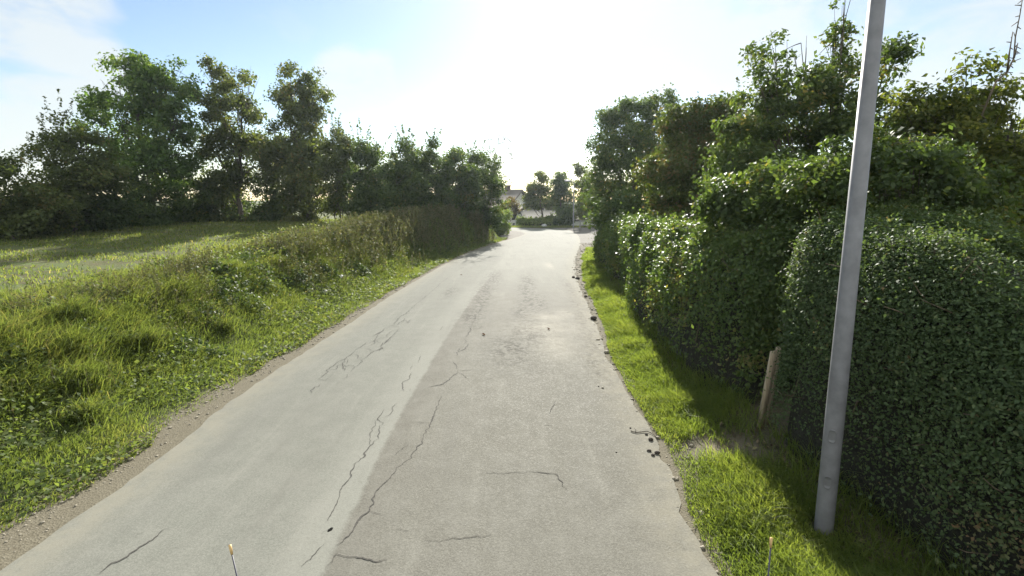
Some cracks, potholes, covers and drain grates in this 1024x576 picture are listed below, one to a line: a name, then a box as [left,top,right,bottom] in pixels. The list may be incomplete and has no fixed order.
crack [307,306,481,567]
crack [310,279,446,393]
crack [102,530,162,571]
